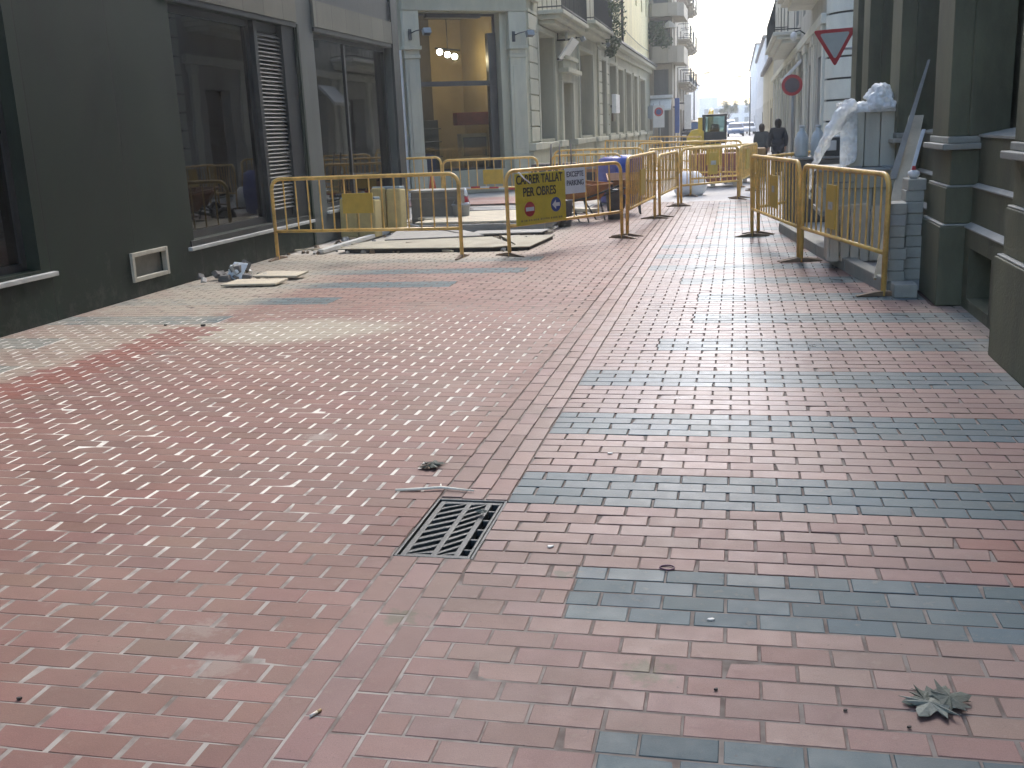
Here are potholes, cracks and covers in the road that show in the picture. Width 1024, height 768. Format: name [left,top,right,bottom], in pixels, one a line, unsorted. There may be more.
drain grate [393,499,508,560]
